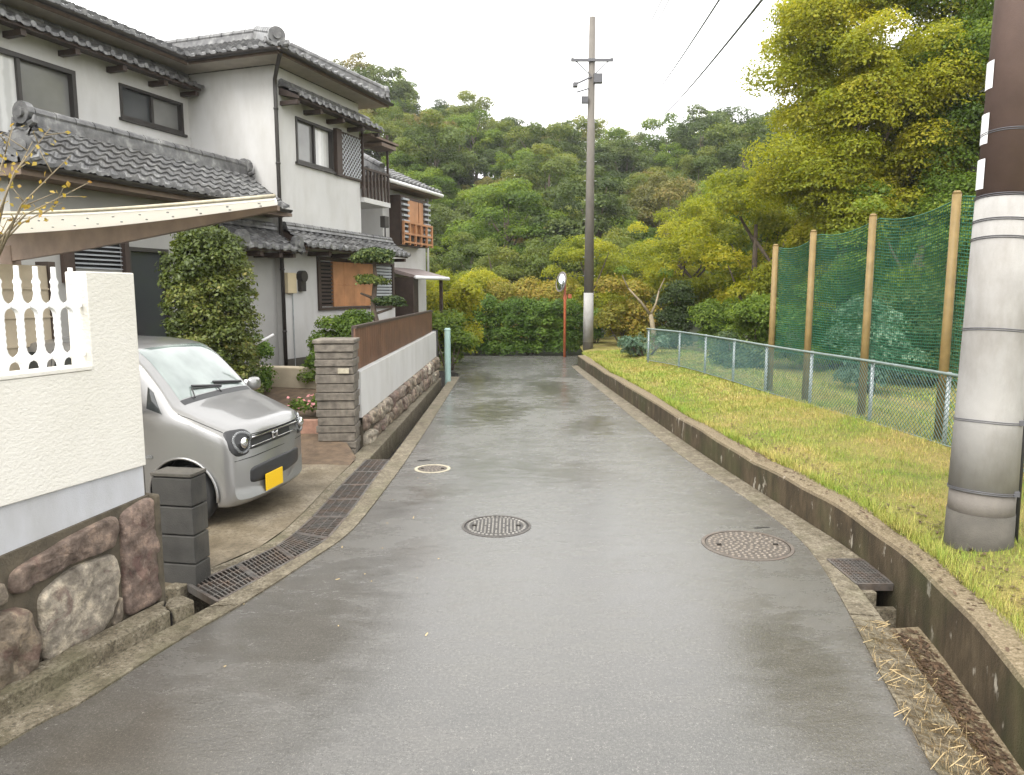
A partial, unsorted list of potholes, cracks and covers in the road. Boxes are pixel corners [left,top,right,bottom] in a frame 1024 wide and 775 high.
drain grate [826,558,894,591]
drain grate [187,564,259,605]
drain grate [354,459,389,472]
drain grate [295,516,347,538]
drain grate [312,499,360,517]
manhole cover [701,530,795,561]
manhole cover [462,515,531,537]
drain grate [276,532,328,559]
drain grate [328,484,370,499]
drain grate [238,546,294,578]
manhole cover [414,464,451,473]
drain grate [341,471,380,485]
